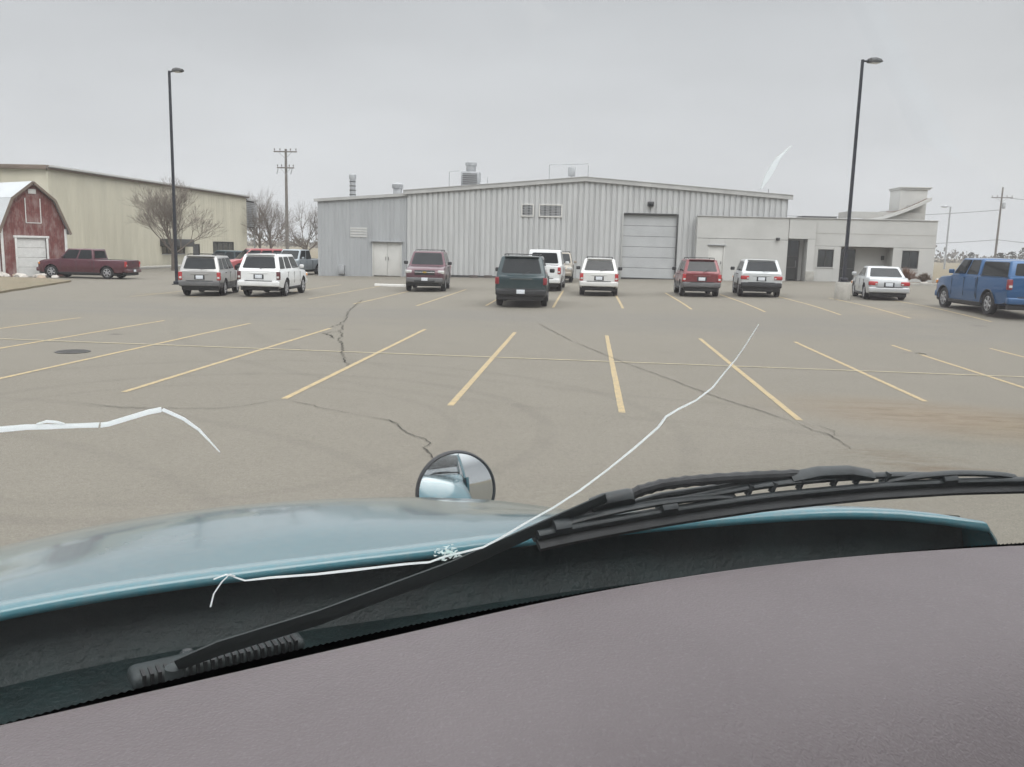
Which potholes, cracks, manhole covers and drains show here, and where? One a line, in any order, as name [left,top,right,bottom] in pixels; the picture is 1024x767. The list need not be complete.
crack [325,301,360,365]
crack [540,324,850,447]
crack [87,400,433,458]
